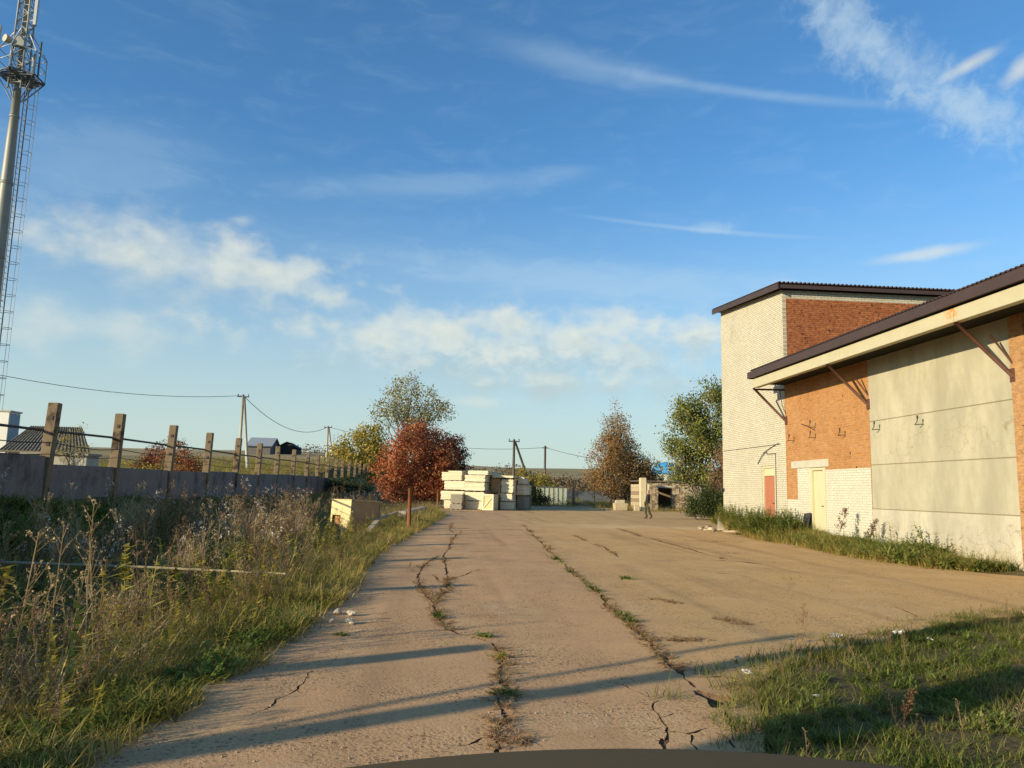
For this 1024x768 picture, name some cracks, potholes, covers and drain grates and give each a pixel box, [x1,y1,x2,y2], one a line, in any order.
crack [252,671,313,714]
crack [409,522,914,753]
